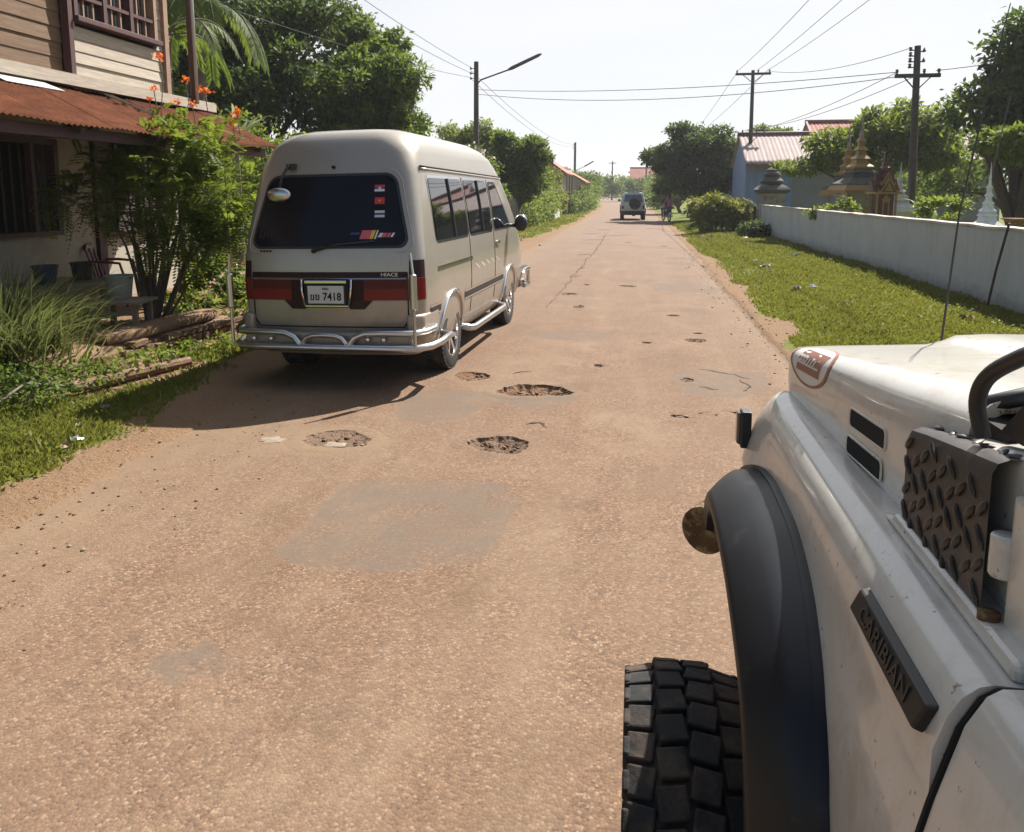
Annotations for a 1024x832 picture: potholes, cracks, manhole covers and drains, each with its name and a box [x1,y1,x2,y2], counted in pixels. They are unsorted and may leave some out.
crack [546,229,616,309]
pothole [448,430,547,461]
pothole [653,410,703,423]
pothole [440,369,504,385]
pothole [678,408,736,421]
pothole [673,337,717,345]
pothole [480,381,590,401]
pothole [283,425,390,454]
